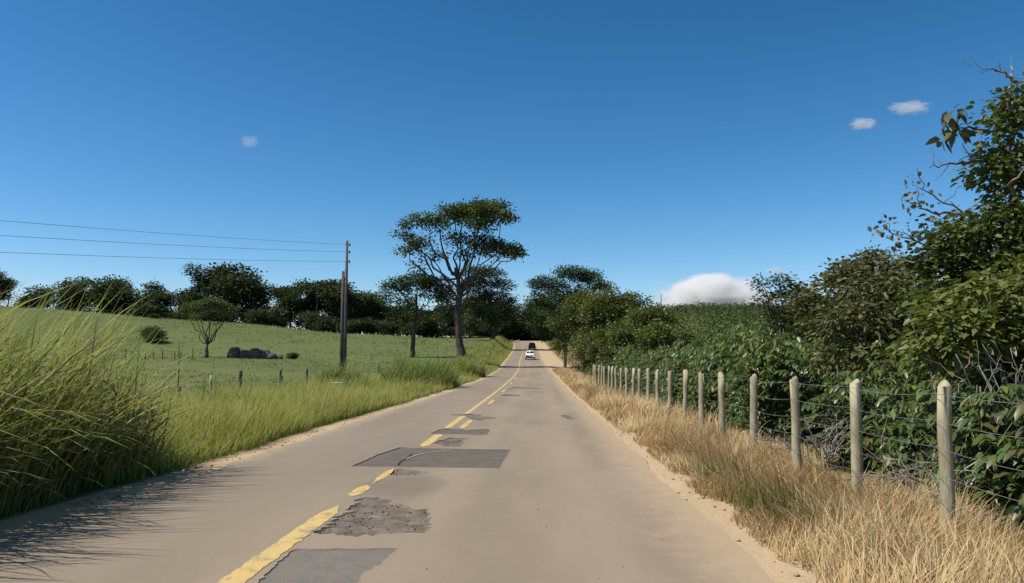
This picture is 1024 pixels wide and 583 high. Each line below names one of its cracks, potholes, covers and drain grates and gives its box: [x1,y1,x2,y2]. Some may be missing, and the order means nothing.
pothole [313,497,433,537]
